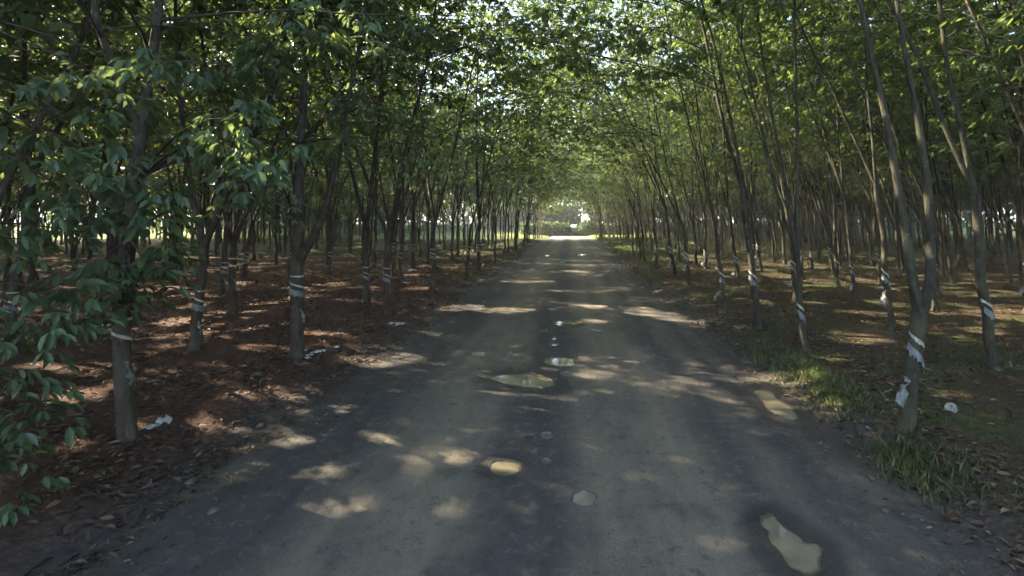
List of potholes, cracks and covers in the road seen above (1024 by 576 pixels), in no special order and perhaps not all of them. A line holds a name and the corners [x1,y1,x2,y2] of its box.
pothole [490,373,555,388]
pothole [571,488,597,506]
pothole [544,357,575,367]
pothole [759,514,825,576]
pothole [489,460,521,476]
